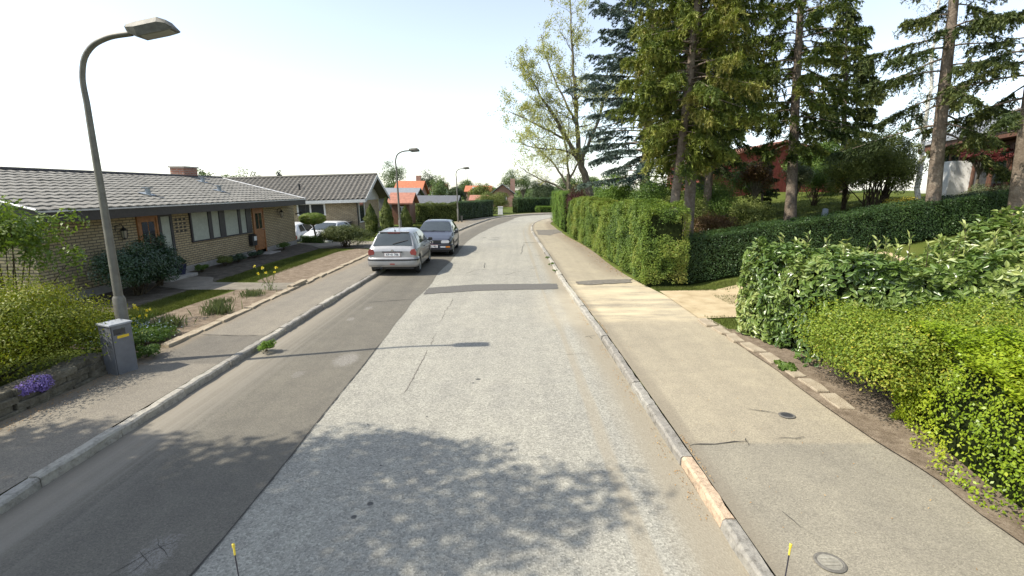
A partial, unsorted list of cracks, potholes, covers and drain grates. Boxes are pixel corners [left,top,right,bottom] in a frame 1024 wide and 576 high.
manhole cover [813,552,847,573]
crack [405,298,453,391]
